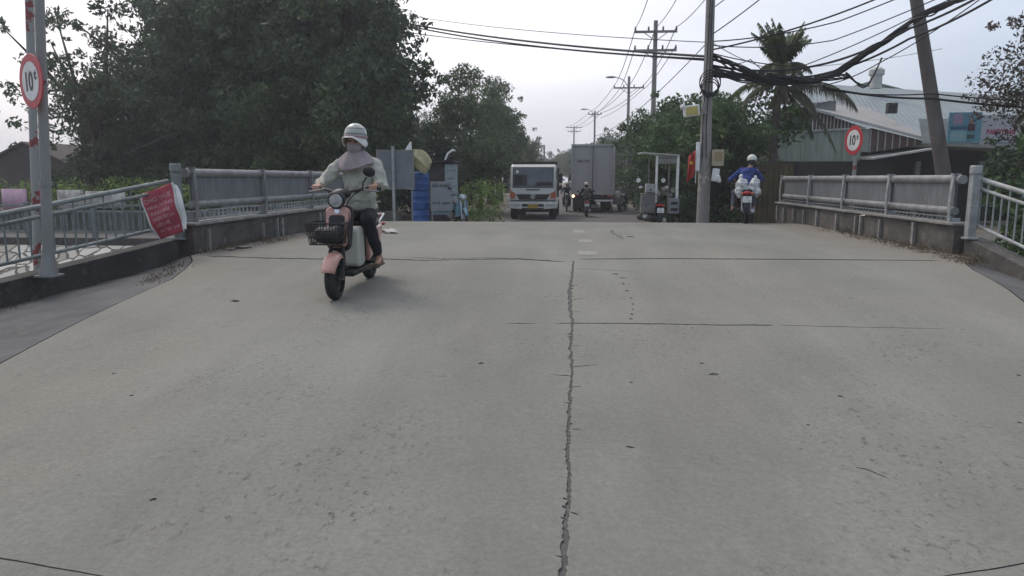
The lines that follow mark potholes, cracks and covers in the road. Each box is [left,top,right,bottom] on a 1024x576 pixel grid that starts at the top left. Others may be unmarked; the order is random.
crack [211,256,634,576]
